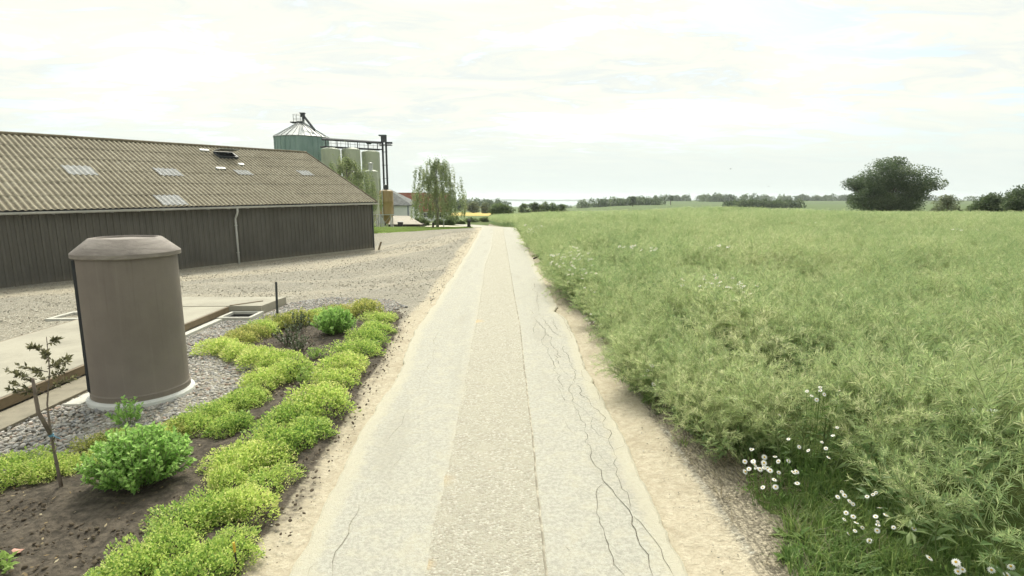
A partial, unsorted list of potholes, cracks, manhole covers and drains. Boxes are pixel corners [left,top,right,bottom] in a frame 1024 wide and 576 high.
crack [532,309,672,576]
